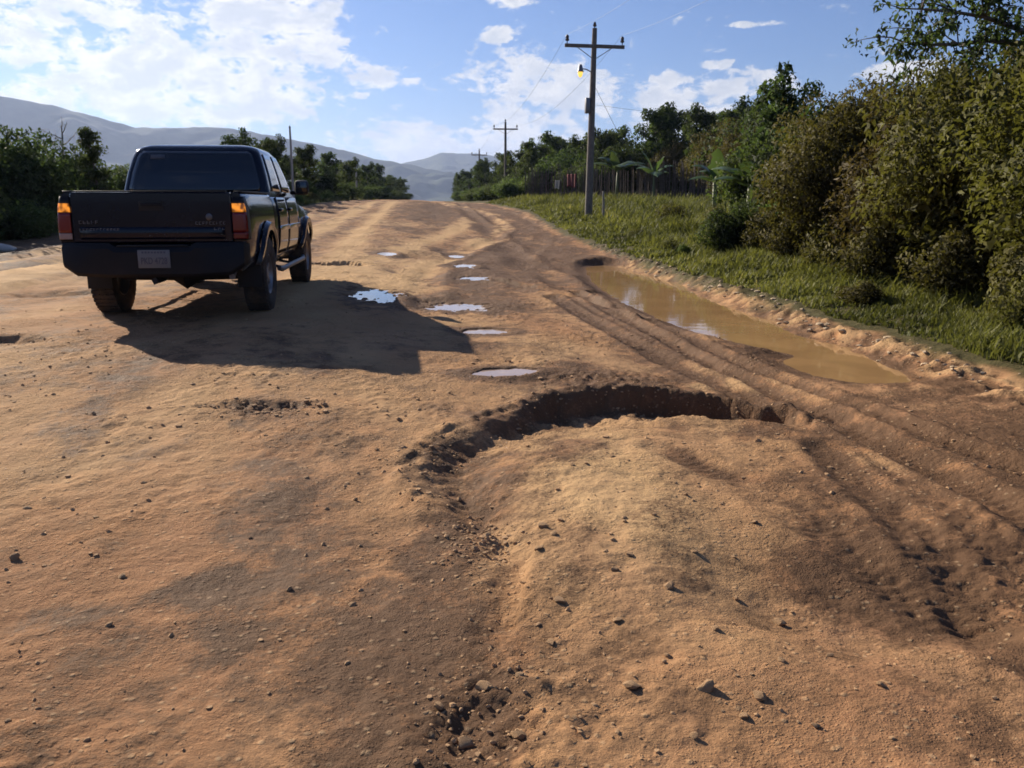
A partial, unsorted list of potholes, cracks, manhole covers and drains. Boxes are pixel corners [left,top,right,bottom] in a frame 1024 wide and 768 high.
pothole [472,367,539,377]
pothole [198,398,343,416]
pothole [343,286,412,308]
pothole [414,298,522,313]
